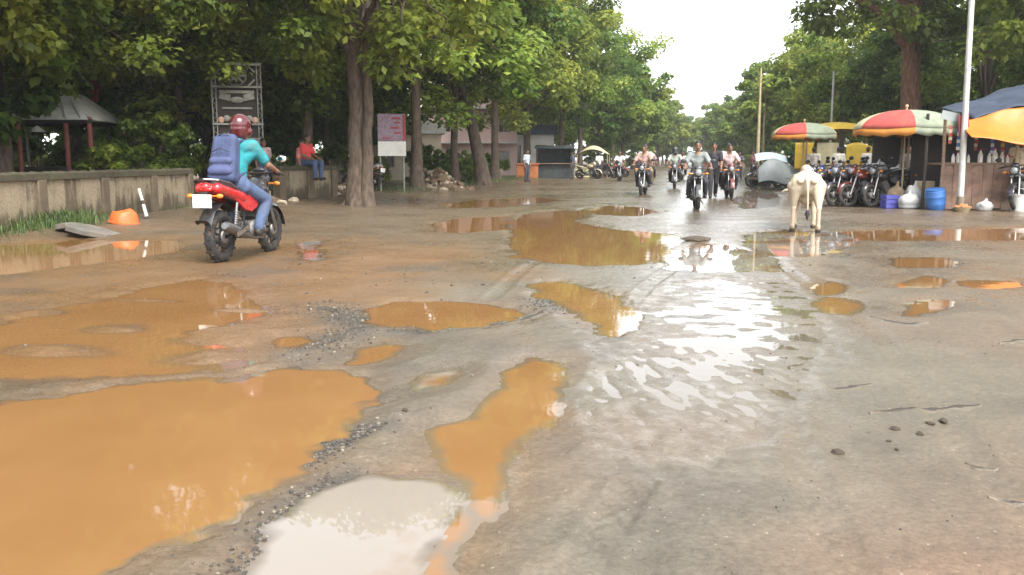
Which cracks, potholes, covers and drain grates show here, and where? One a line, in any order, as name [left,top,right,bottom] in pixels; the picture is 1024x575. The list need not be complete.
pothole [880,255,970,269]
pothole [226,468,472,575]
pothole [804,279,859,296]
pothole [520,279,645,338]
pothole [395,364,475,395]
pothole [355,299,533,332]
pothole [414,355,578,526]
pothole [948,278,1024,289]
pothole [336,340,413,367]
pothole [500,209,690,267]
pothole [436,196,564,208]
pothole [893,296,965,317]
